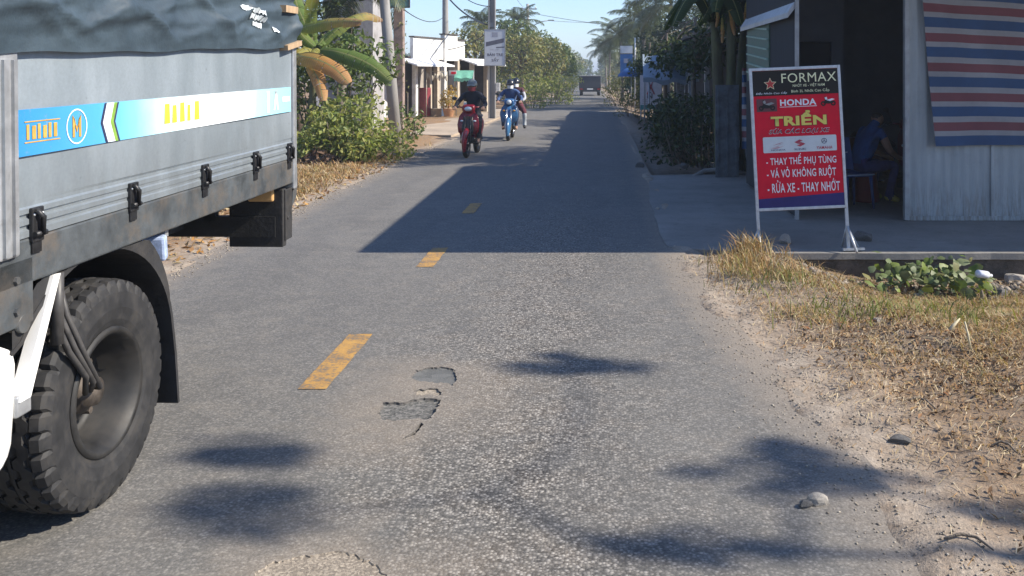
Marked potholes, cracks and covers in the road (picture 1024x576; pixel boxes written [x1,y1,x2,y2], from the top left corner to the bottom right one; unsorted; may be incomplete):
pothole [378,398,441,421]
pothole [415,388,441,396]
pothole [411,366,457,386]
crack [403,423,423,439]
pothole [255,551,387,576]
